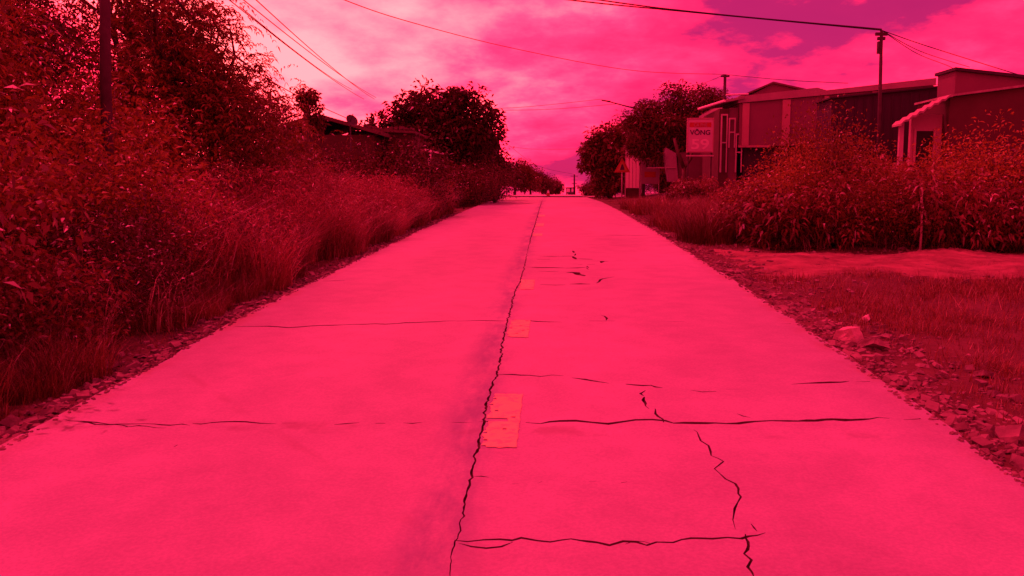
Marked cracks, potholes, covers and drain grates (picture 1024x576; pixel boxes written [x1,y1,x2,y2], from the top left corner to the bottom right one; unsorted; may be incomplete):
crack [449,201,920,576]
